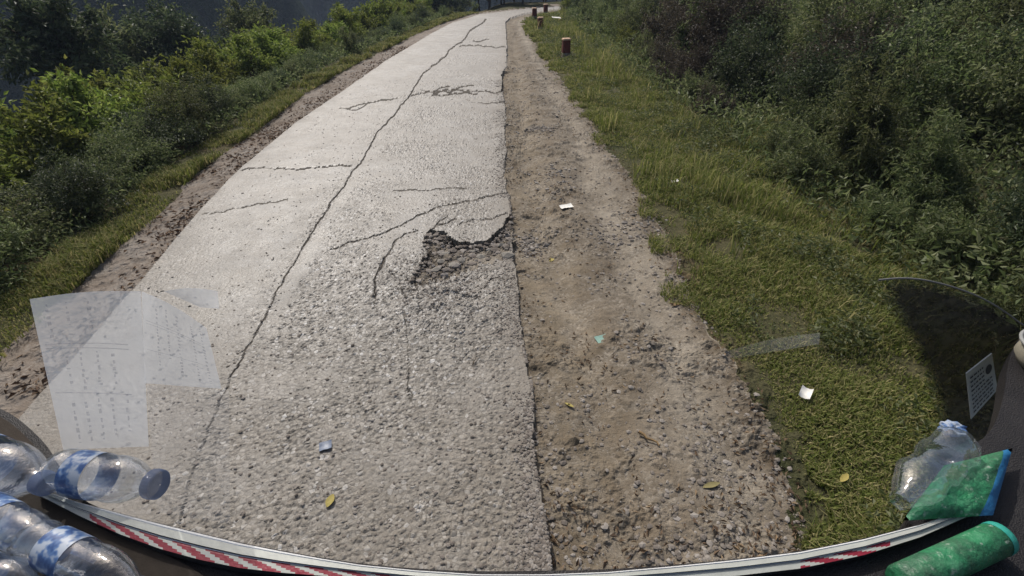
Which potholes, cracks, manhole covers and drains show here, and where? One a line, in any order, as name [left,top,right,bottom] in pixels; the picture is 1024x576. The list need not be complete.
pothole [410,214,516,287]
crack [340,85,504,111]
crack [460,39,505,48]
crack [330,187,507,402]
crack [202,199,288,215]
